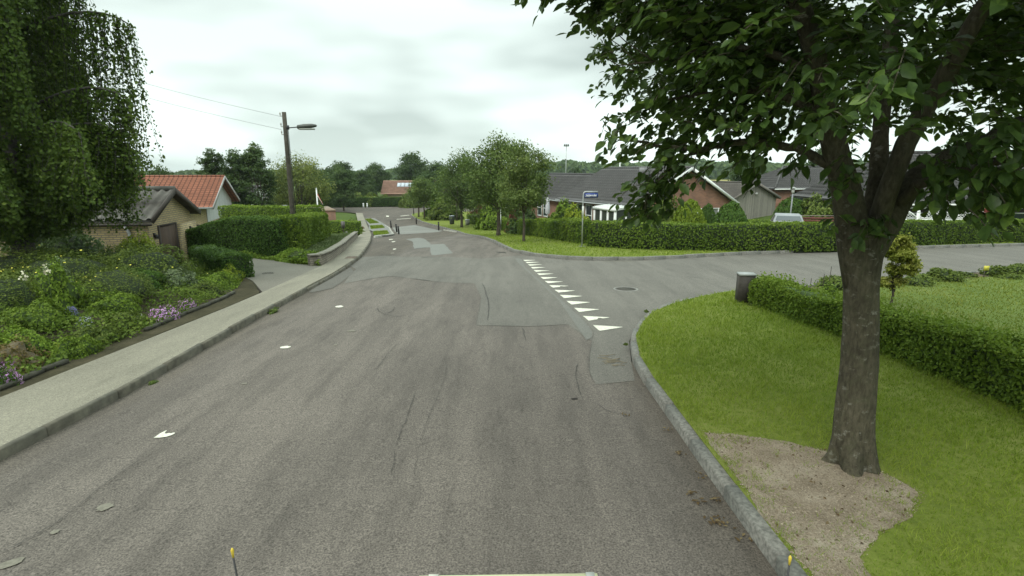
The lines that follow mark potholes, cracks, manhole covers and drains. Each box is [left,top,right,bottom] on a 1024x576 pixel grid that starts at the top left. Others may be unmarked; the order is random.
crack [391,364,446,474]
